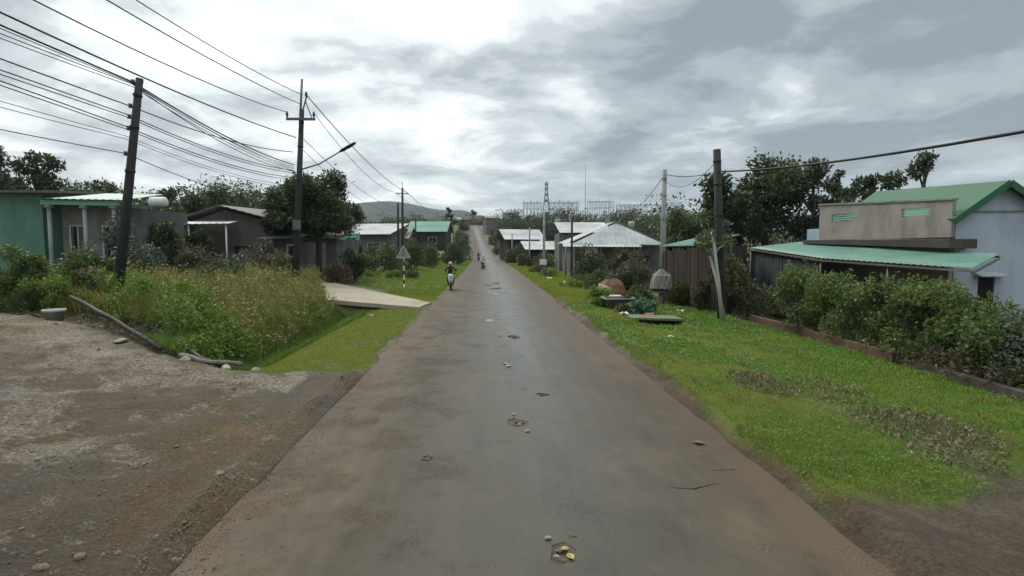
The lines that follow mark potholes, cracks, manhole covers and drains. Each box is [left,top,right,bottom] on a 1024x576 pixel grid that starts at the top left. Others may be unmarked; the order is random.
pothole [551,542,577,566]
pothole [507,418,529,427]
